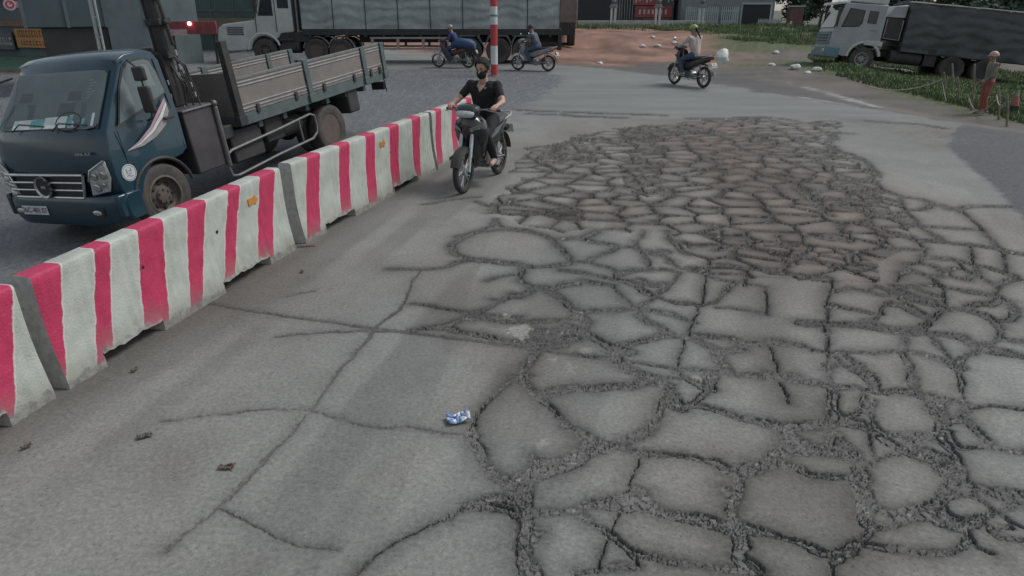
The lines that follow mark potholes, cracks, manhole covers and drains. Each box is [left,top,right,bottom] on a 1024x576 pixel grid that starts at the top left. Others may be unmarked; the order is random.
crack [158,108,1024,576]
